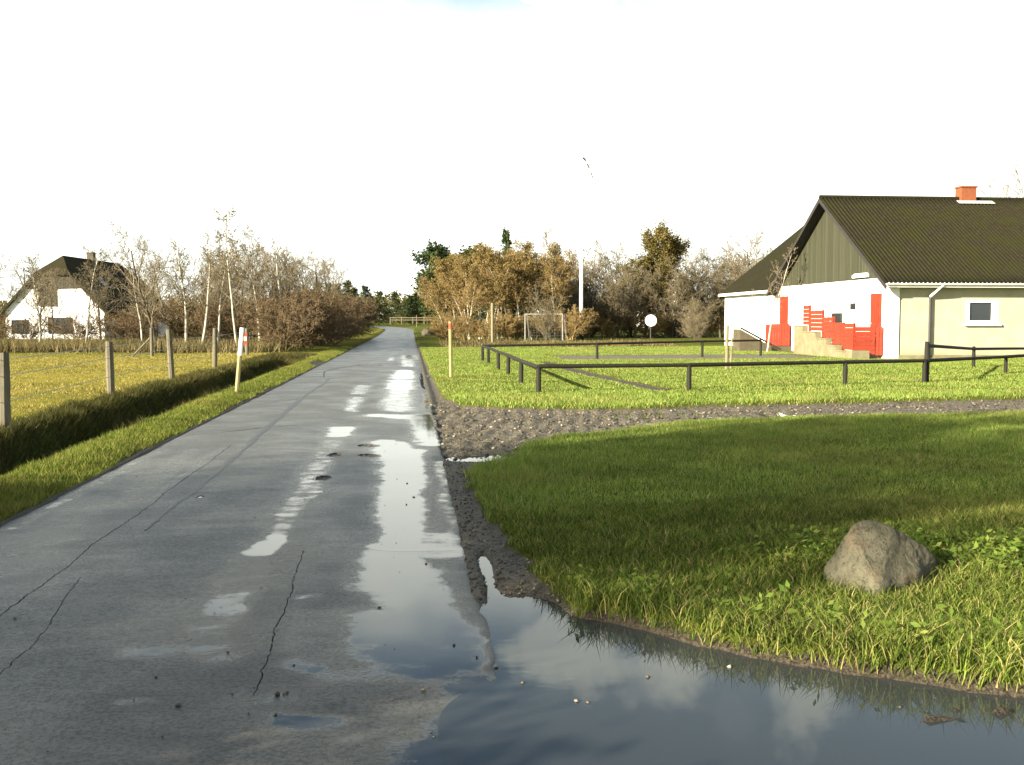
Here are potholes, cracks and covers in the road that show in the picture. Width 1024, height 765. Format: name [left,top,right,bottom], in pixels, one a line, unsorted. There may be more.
crack [187,422,323,436]
